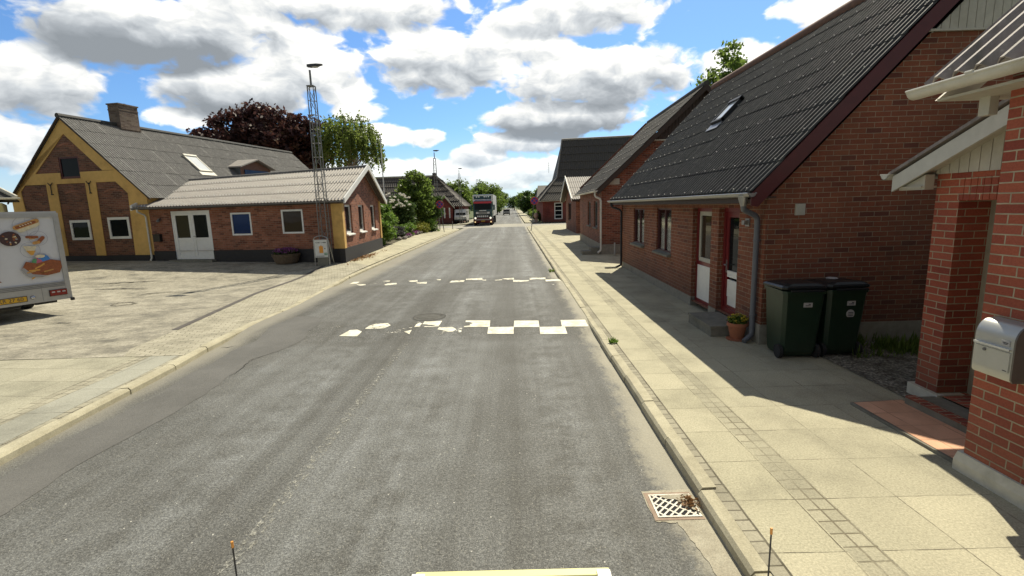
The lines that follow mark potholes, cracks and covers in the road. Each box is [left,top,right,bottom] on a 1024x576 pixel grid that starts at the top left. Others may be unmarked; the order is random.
drain grate [643,492,705,521]
manhole cover [413,313,446,321]
